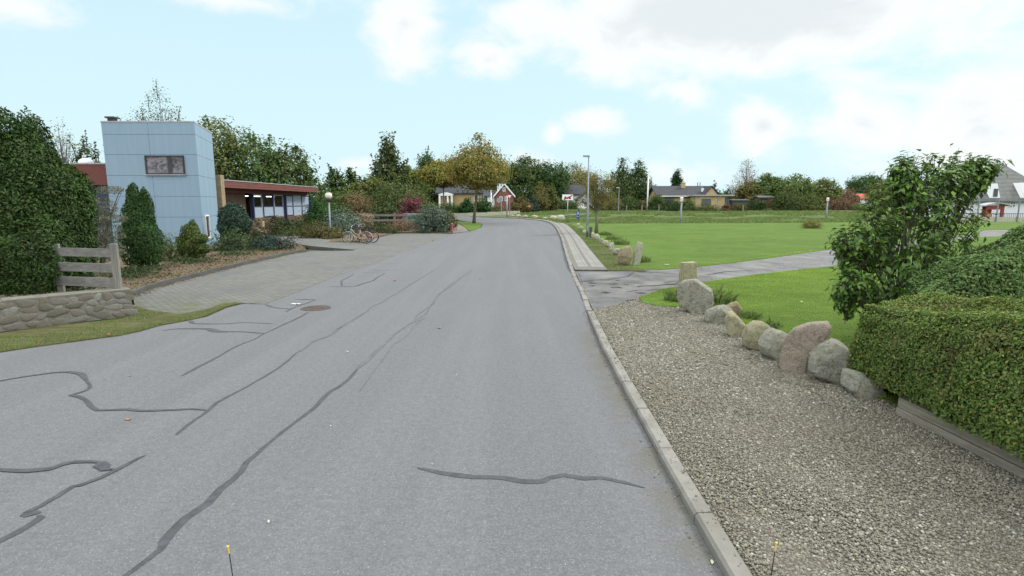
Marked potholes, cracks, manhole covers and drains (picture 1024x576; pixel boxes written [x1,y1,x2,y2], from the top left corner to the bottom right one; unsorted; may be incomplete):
crack [358,320,421,393]
